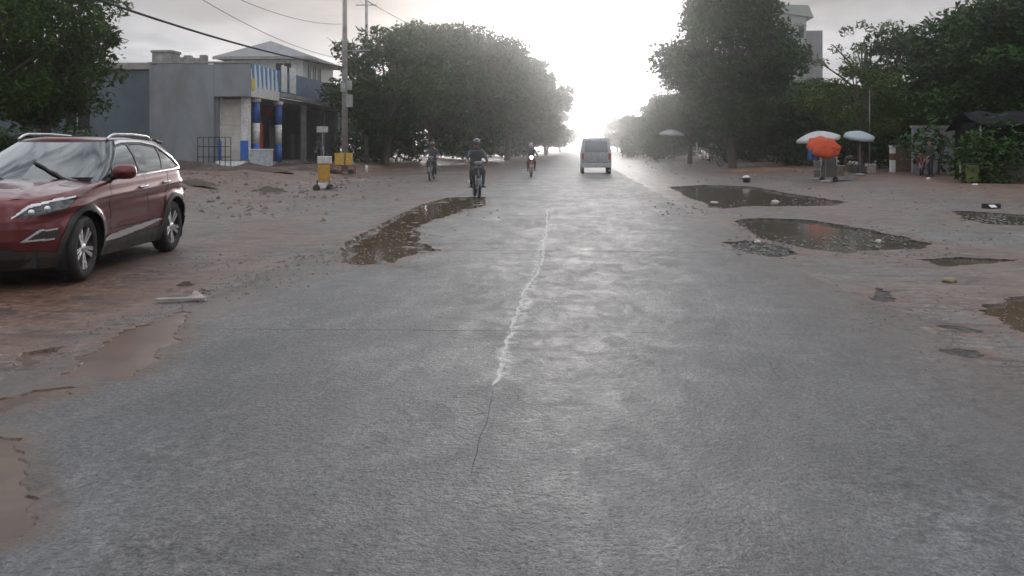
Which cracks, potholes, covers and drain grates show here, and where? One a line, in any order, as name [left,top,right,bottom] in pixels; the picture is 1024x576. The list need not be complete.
pothole [59,311,192,379]
pothole [0,436,40,544]
pothole [722,240,798,257]
pothole [670,185,844,209]
pothole [936,325,985,333]
crack [273,210,835,475]
pothole [953,211,1024,225]
pothole [11,346,66,367]
pothole [938,348,986,358]
pothole [869,290,897,303]
pothole [919,257,1017,267]
